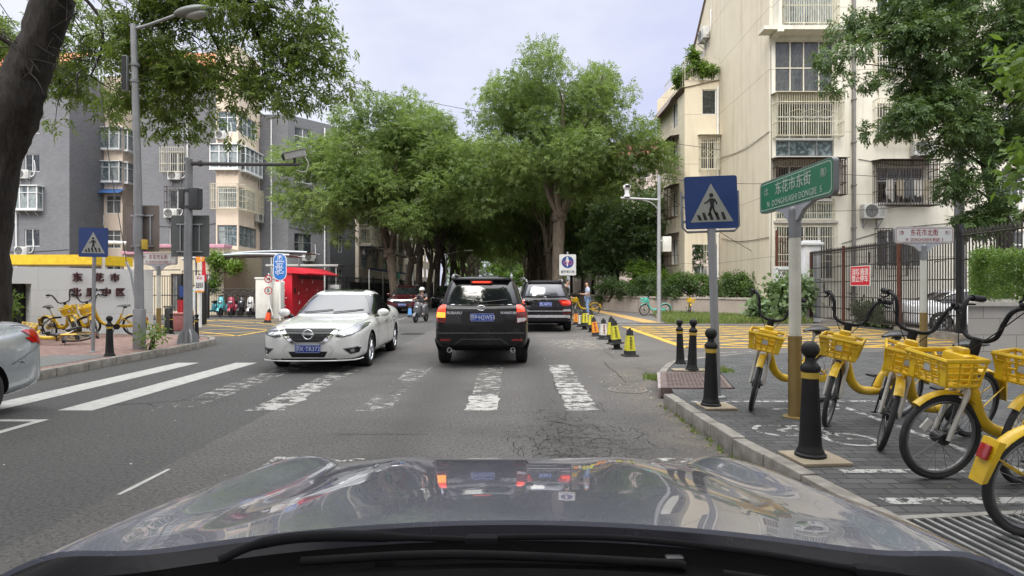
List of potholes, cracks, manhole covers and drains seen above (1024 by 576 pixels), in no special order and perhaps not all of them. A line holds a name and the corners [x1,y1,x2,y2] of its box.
crack [502,375,685,458]
drain grate [898,510,1024,575]
manhole cover [608,386,648,394]
